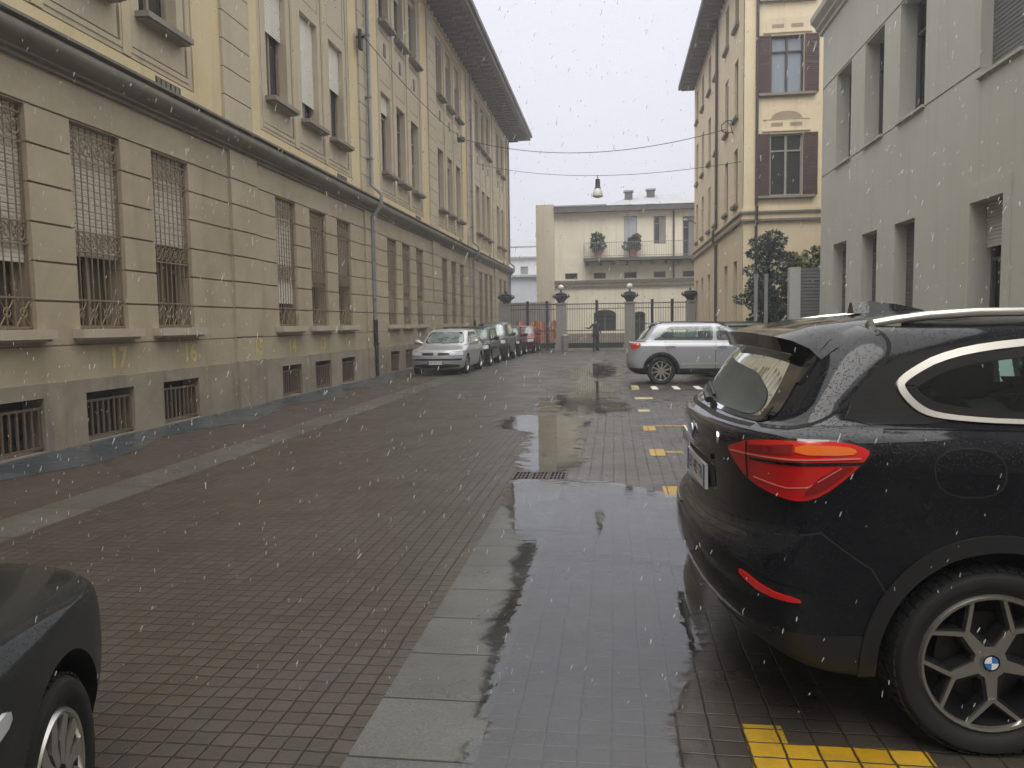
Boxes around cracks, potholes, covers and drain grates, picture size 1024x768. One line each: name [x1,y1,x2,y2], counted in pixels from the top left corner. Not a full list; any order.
drain grate [511,472,567,480]
